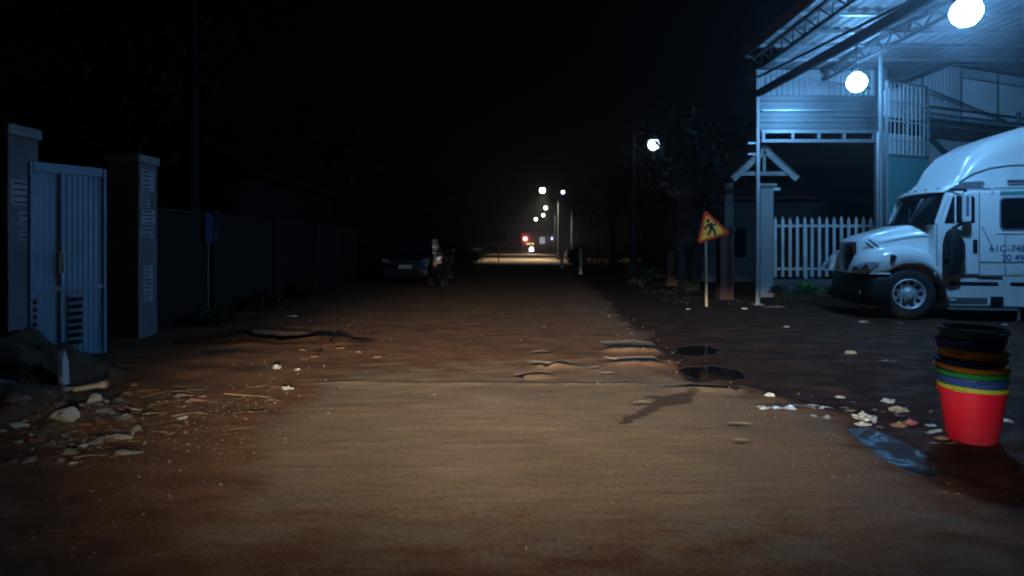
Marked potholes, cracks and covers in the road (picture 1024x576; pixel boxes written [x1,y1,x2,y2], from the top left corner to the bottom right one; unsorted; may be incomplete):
pothole [597,339,658,349]
pothole [677,365,747,380]
pothole [673,345,721,355]
